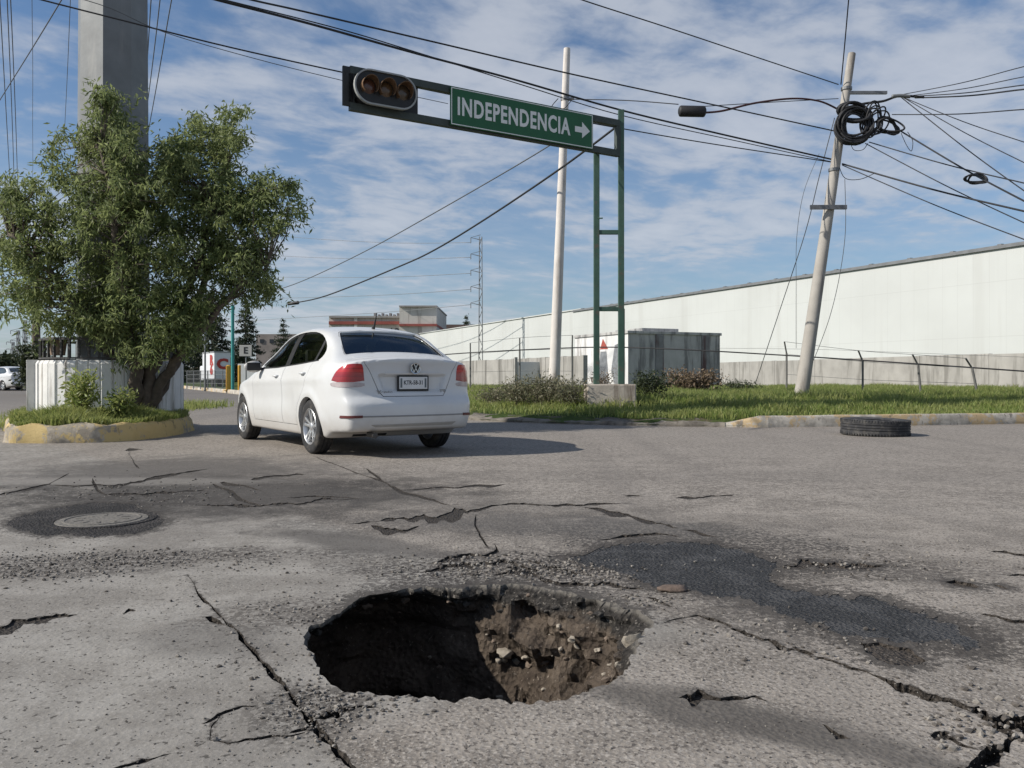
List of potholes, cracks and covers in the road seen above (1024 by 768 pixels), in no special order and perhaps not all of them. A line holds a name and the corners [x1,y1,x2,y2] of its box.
crack [0,448,1024,768]
manhole cover [7,502,166,537]
pothole [303,583,654,705]
